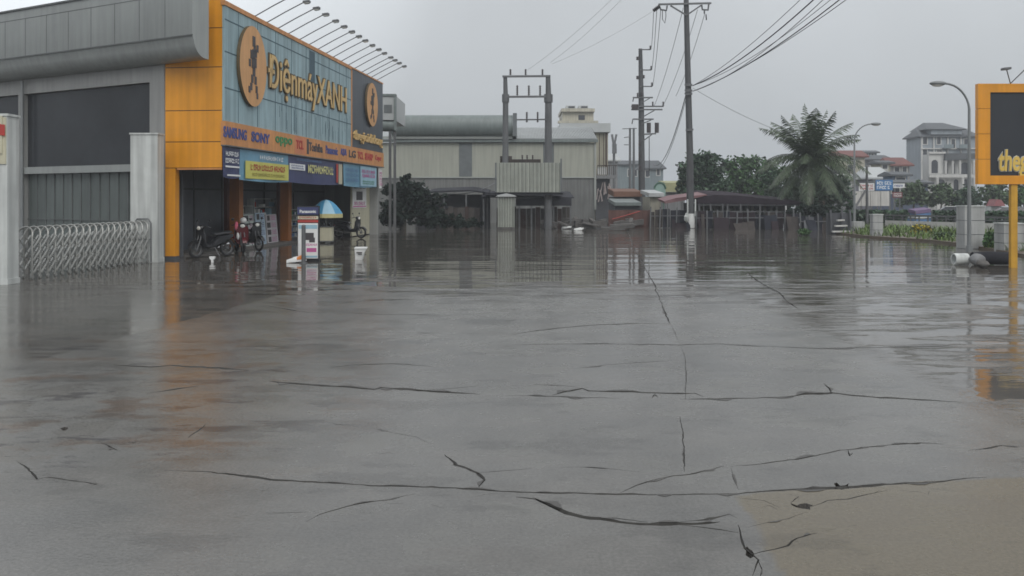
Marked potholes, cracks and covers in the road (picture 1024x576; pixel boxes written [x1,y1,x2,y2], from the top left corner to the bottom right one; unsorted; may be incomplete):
crack [748,274,798,309]
crack [165,343,987,576]
crack [18,462,97,485]
